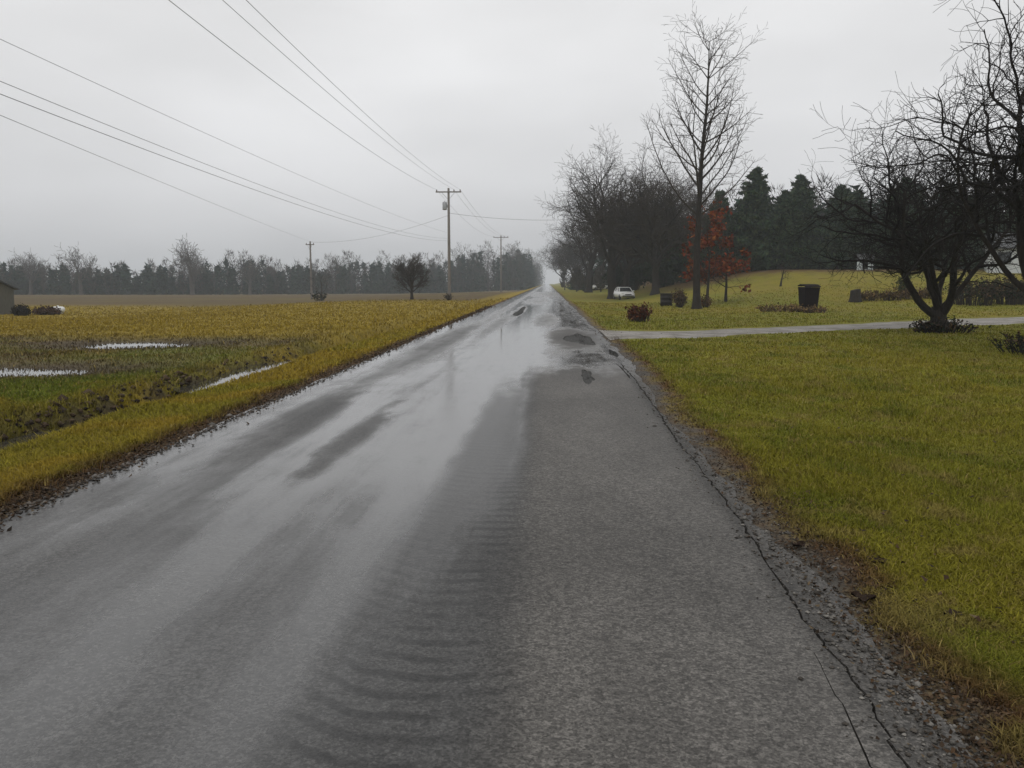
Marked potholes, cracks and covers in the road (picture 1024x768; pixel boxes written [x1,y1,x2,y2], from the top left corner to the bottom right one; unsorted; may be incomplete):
pothole [563,333,596,345]
pothole [581,369,595,384]
